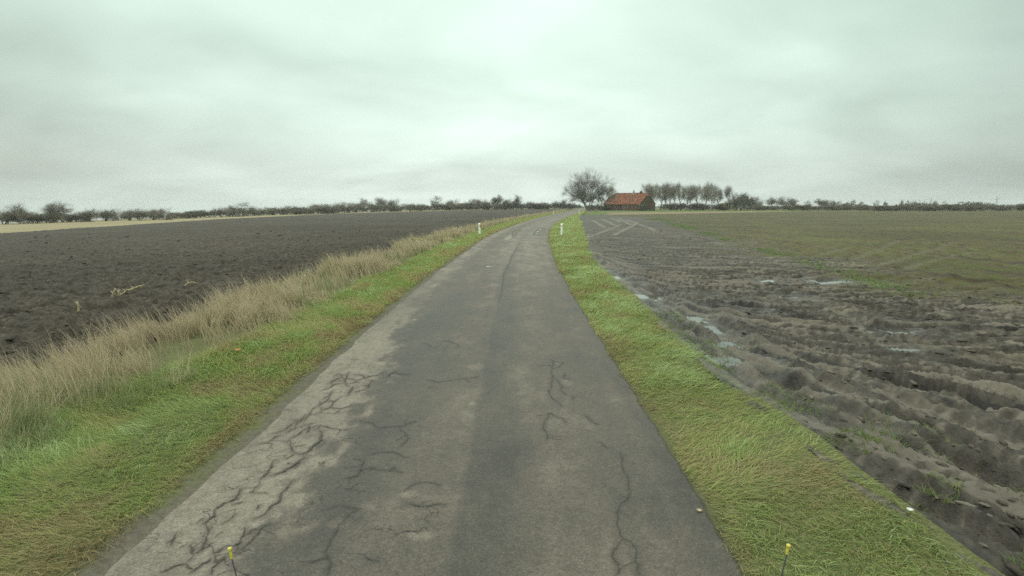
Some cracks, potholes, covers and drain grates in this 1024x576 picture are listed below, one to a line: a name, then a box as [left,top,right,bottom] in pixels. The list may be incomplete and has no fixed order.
crack [345,420,441,513]
crack [600,441,639,574]
crack [538,360,568,439]
crack [160,371,409,573]
